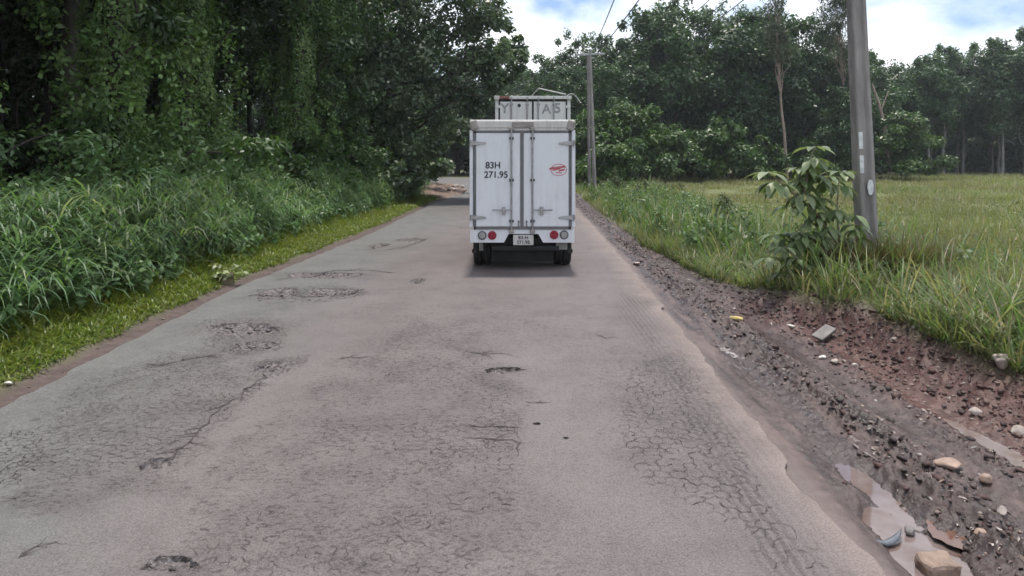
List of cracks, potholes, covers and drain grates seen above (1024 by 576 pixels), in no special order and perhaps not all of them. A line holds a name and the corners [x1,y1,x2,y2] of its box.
pothole [139,555,200,572]
crack [18,537,62,558]
crack [195,510,472,575]
pothole [256,287,299,300]
pothole [204,323,280,337]
pothole [307,288,359,297]
pothole [230,341,280,352]
crack [0,317,313,499]
crack [265,323,543,511]
crack [615,353,827,568]
